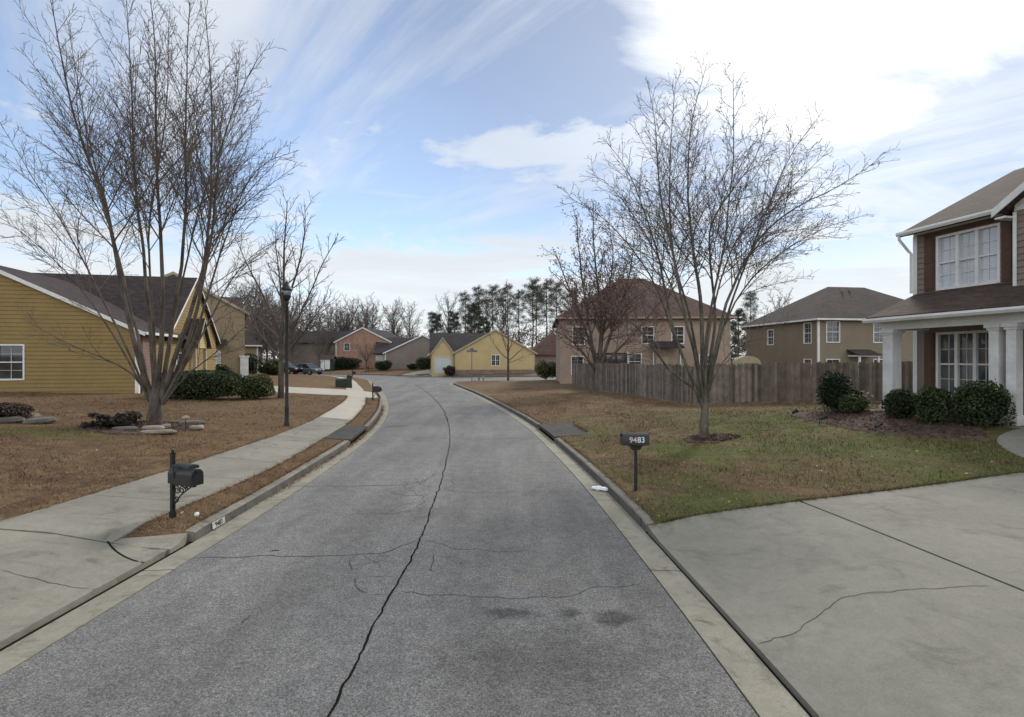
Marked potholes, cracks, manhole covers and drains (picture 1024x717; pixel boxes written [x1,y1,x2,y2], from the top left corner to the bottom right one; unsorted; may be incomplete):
crack [758,585,990,644]
drain grate [325,425,367,444]
drain grate [538,422,591,442]
crack [201,384,634,717]
